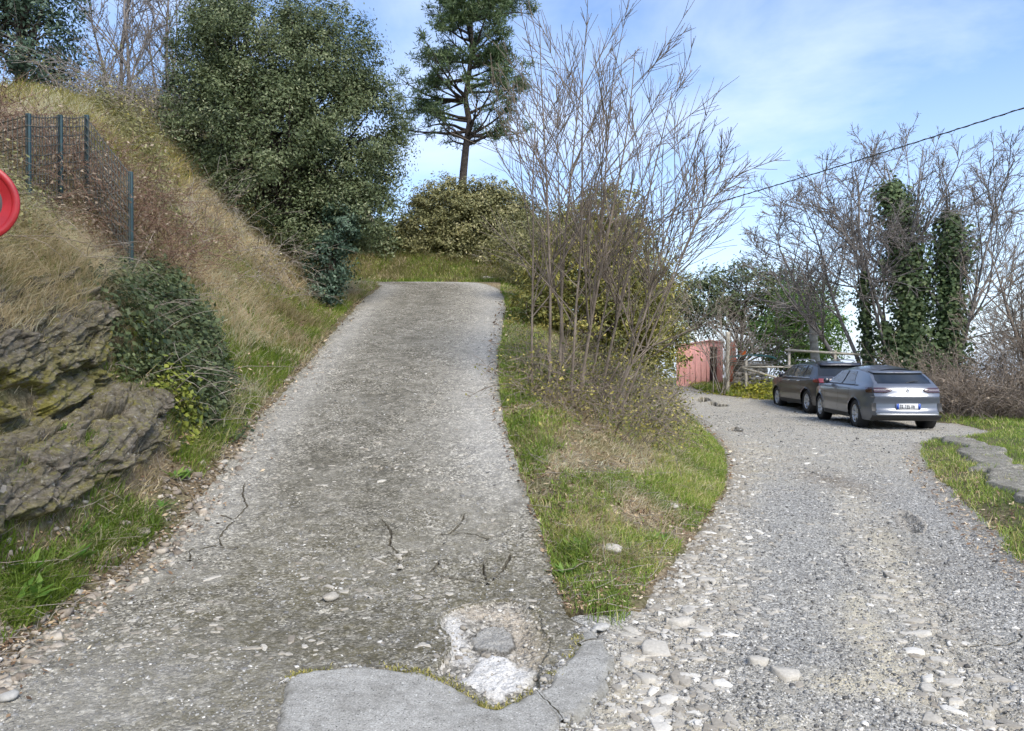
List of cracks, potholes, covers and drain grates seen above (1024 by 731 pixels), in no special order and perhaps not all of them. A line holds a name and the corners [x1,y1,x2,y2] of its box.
crack [378,512,514,586]
pothole [429,597,556,707]
crack [185,482,251,561]
crack [533,690,565,724]
